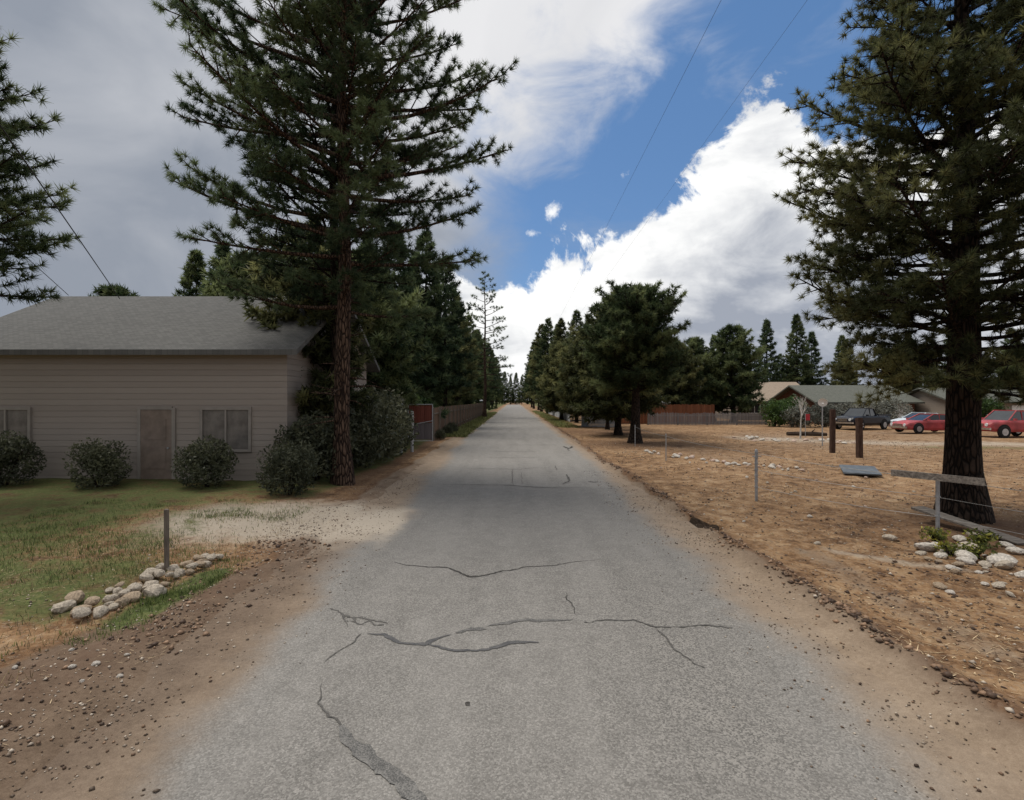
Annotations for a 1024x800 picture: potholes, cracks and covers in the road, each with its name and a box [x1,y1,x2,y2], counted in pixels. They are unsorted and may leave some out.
crack [330,608,388,626]
pothole [689,517,719,531]
crack [317,685,342,725]
crack [392,559,599,577]
crack [592,619,733,668]
